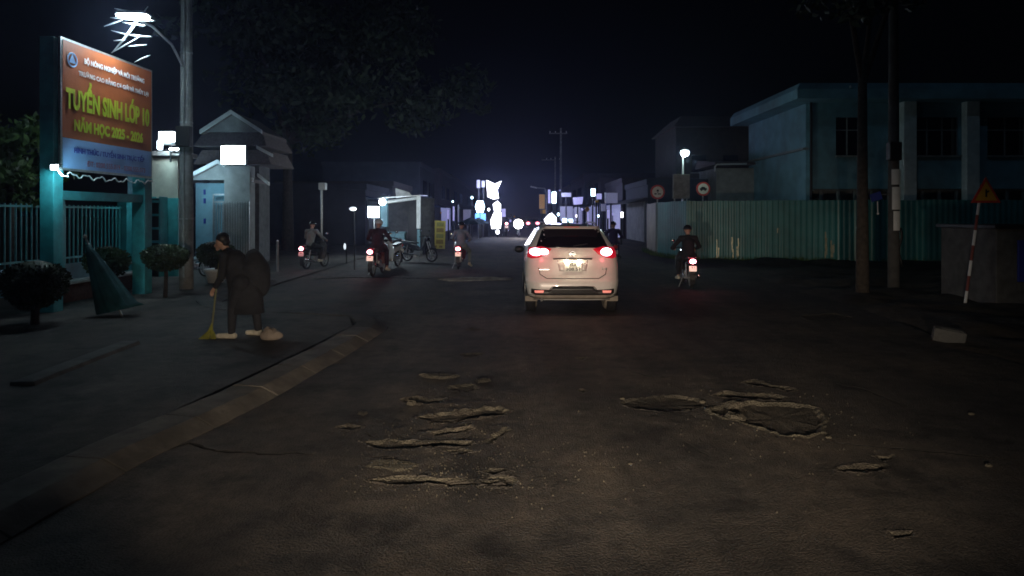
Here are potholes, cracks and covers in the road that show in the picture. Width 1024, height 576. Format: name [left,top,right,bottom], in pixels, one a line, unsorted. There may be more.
pothole [479,467,514,475]
pothole [333,422,366,432]
pothole [482,426,514,444]
pothole [363,437,476,451]
pothole [426,424,477,437]
pothole [831,462,896,474]
pothole [473,474,522,490]
pothole [365,474,506,489]
pothole [397,395,449,406]
pothole [444,383,481,393]
pothole [704,400,829,439]
pothole [414,405,514,424]
